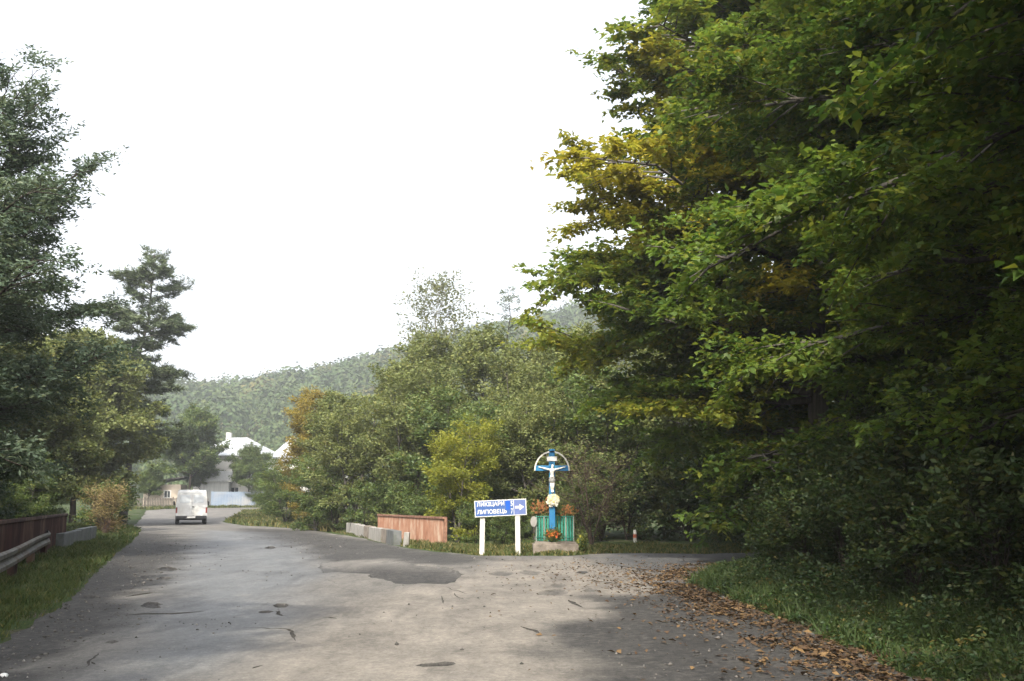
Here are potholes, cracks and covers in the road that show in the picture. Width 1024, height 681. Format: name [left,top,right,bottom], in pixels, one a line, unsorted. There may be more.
crack [249,611,296,641]
